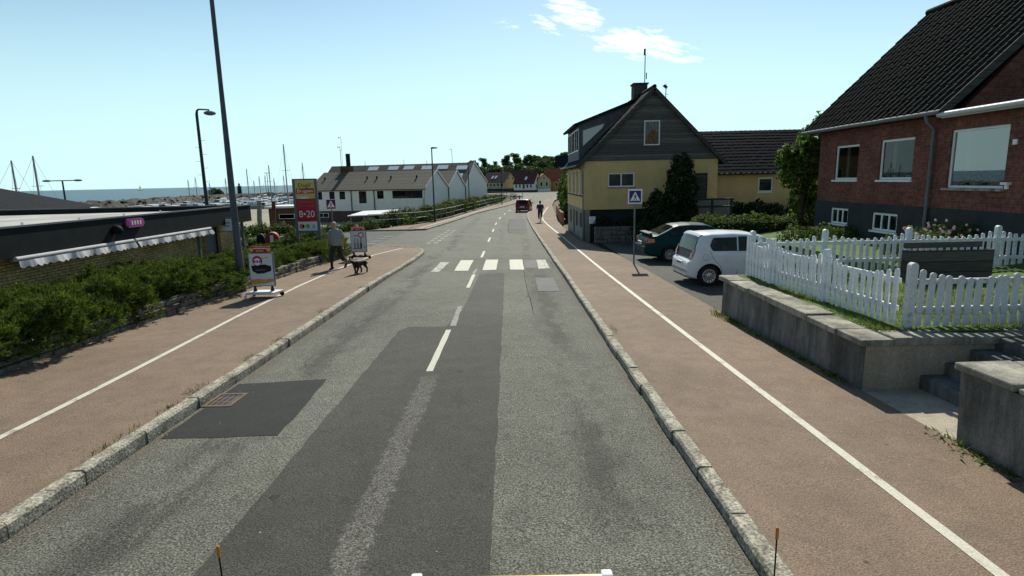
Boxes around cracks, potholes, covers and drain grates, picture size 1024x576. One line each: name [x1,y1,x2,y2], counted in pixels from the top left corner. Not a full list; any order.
drain grate [201,393,248,408]
